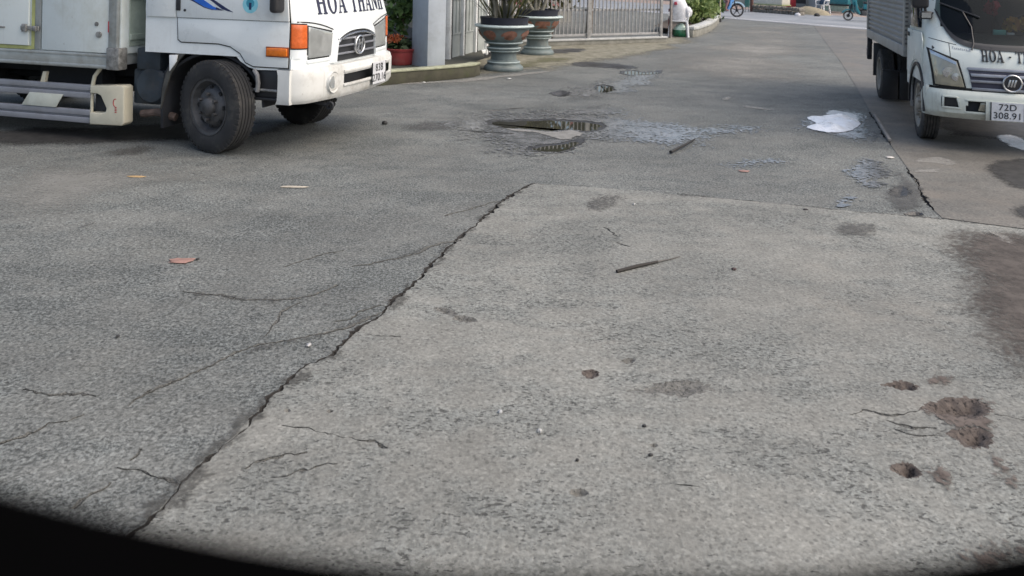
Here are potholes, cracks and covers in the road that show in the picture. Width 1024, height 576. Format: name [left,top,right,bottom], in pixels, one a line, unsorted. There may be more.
pothole [945,426,994,449]
pothole [889,461,923,479]
pothole [526,138,585,152]
crack [856,410,936,437]
pothole [880,380,919,391]
pothole [484,119,607,133]
crack [71,191,521,524]
pothole [919,395,995,420]
